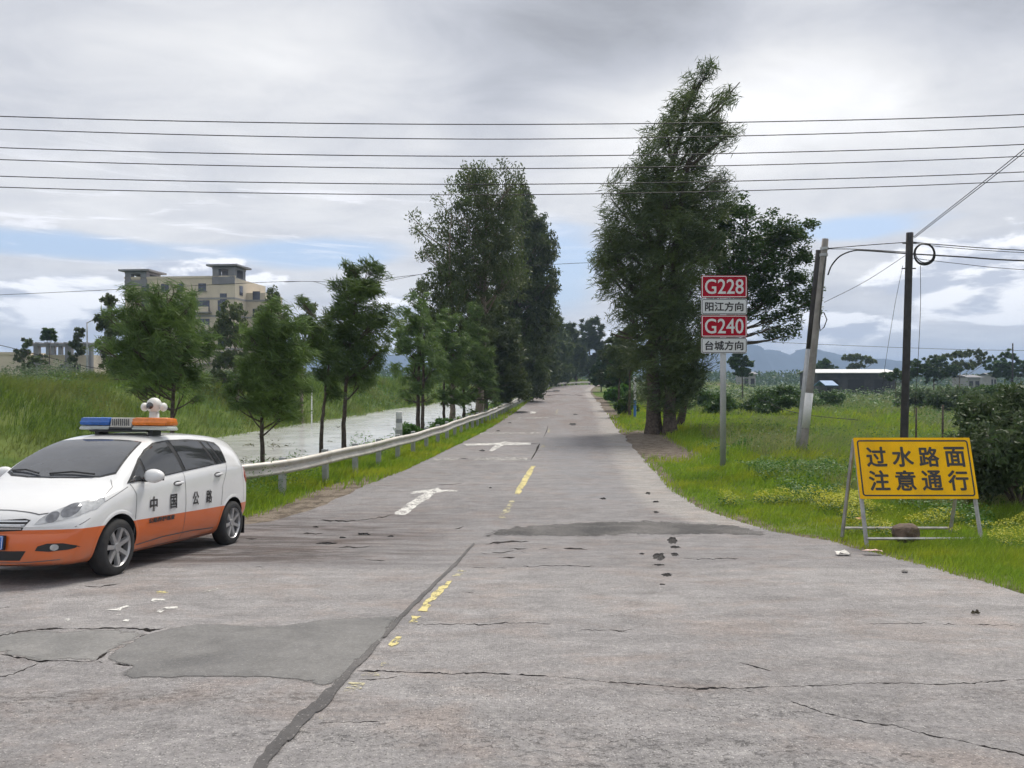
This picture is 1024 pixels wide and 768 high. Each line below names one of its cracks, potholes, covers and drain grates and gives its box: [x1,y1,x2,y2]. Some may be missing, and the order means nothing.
crack [361,662,1024,756]
crack [0,627,163,677]
